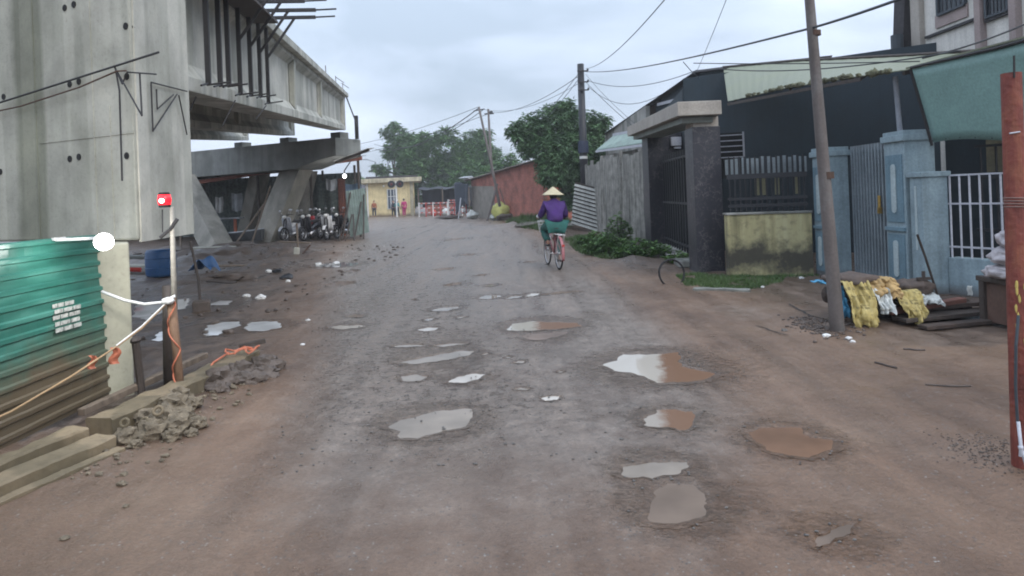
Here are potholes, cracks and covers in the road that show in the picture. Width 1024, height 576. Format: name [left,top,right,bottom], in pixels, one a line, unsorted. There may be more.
pothole [434,371,490,385]
pothole [803,519,862,550]
pothole [391,345,481,366]
pothole [515,329,581,341]
pothole [396,373,434,385]
pothole [611,448,697,485]
pothole [318,323,369,331]
pothole [362,404,497,440]
pothole [715,421,848,465]
pothole [581,348,745,390]
pothole [636,401,714,438]
pothole [499,320,589,335]
